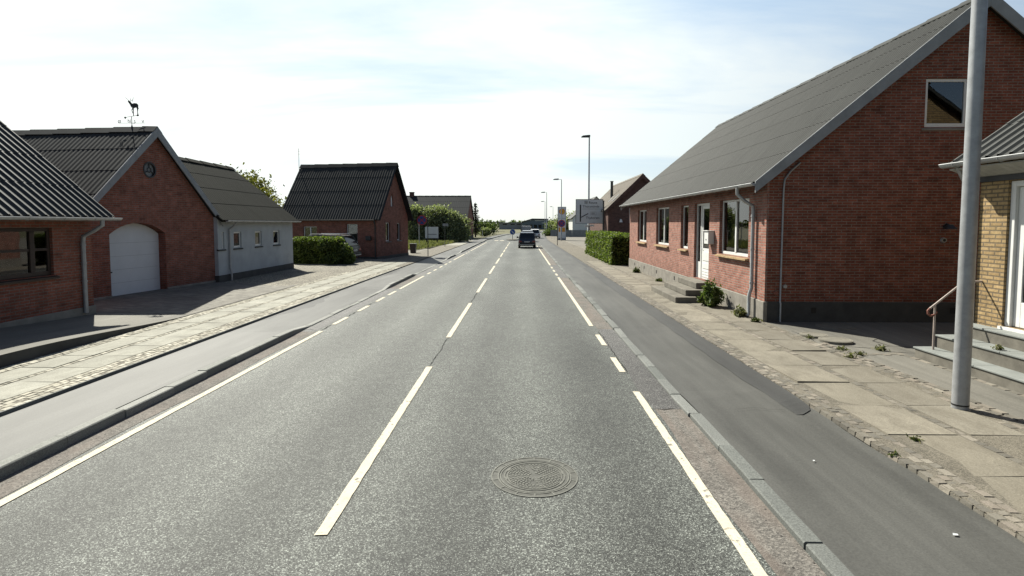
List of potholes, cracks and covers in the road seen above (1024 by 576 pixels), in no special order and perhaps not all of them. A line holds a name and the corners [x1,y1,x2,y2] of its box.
manhole cover [491,457,578,498]
